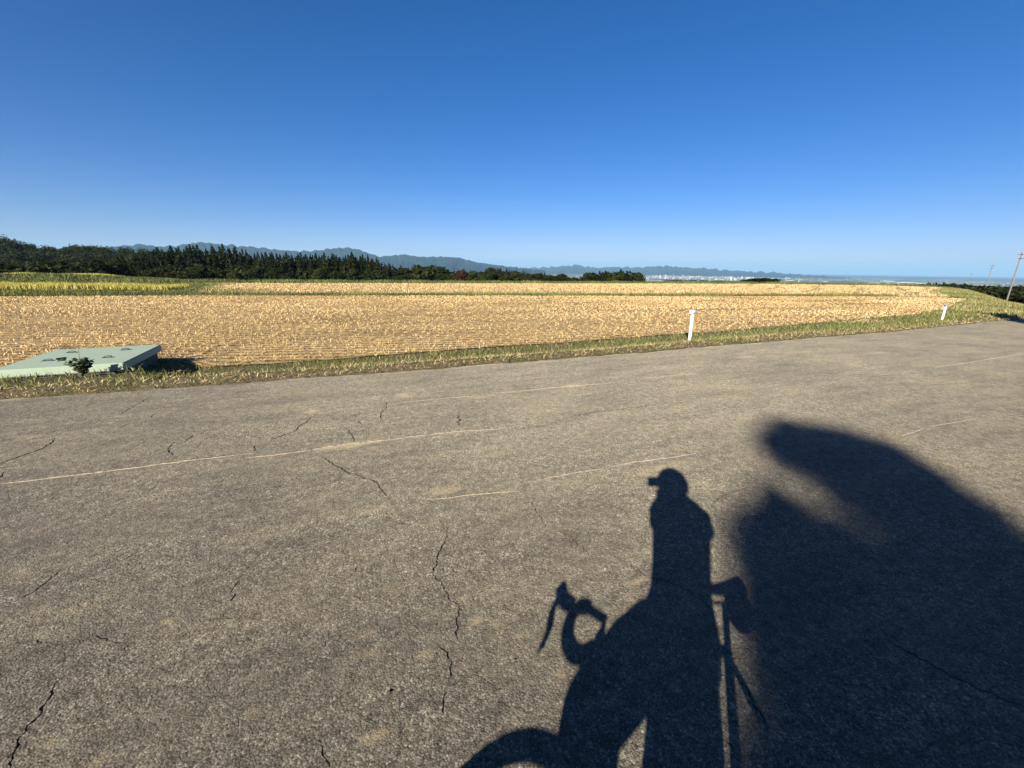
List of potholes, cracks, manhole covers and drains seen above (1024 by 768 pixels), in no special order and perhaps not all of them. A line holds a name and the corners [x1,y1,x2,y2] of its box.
crack [322,421,389,497]
crack [433,528,463,714]
crack [886,641,1024,708]
crack [7,678,61,768]
crack [92,634,128,650]
